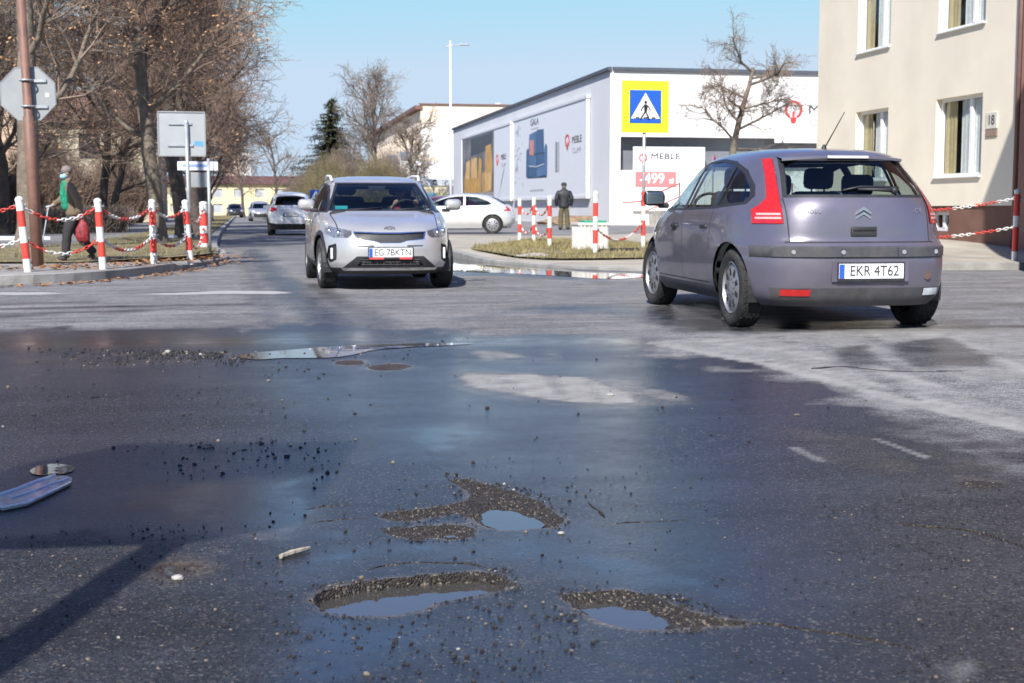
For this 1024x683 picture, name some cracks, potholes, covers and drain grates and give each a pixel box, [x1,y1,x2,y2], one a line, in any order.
pothole [561,590,749,630]
pothole [385,525,475,540]
pothole [380,479,564,530]
crack [901,523,1024,548]
pothole [307,571,517,616]
crack [756,622,917,650]
crack [587,502,690,524]
